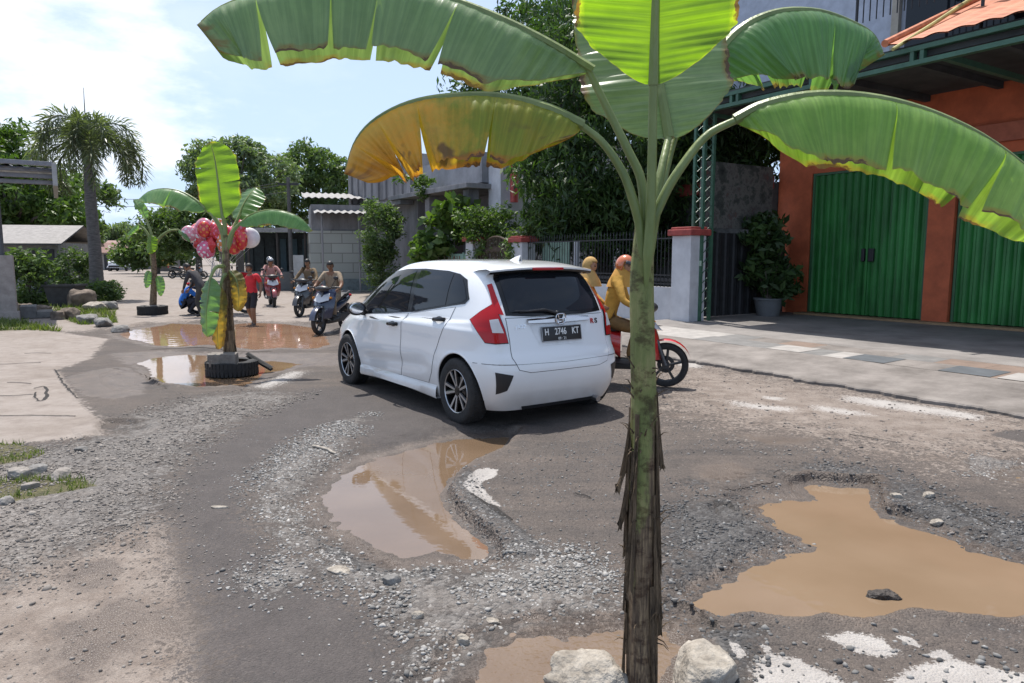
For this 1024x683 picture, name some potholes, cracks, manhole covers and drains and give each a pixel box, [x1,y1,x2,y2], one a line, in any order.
pothole [380,593,754,683]
pothole [661,464,1024,652]
pothole [105,348,330,393]
pothole [77,318,341,352]
pothole [248,420,569,589]
